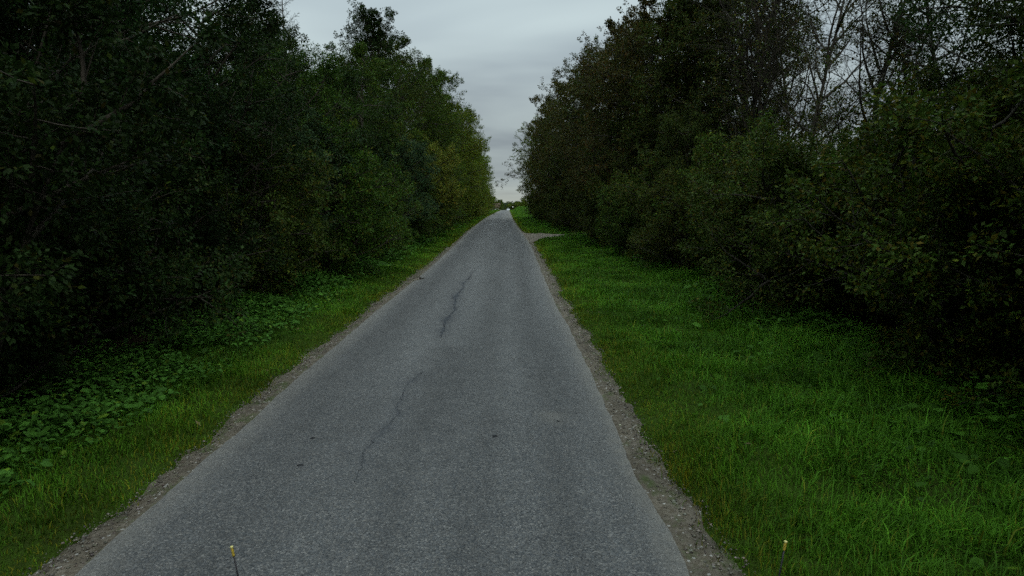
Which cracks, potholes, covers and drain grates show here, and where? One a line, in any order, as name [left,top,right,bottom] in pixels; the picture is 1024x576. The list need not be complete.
crack [440,270,476,338]
crack [354,371,423,482]
